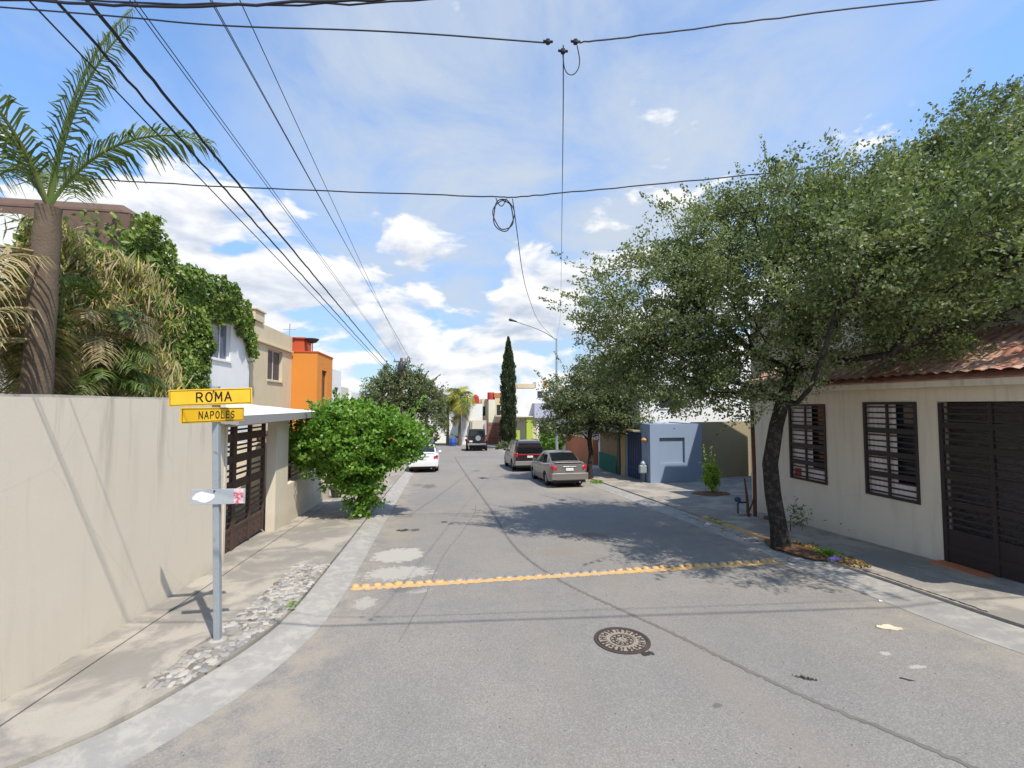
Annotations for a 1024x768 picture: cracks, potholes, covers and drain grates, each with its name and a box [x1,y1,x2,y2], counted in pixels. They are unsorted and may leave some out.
manhole cover [594,627,651,655]
crack [399,505,476,641]
